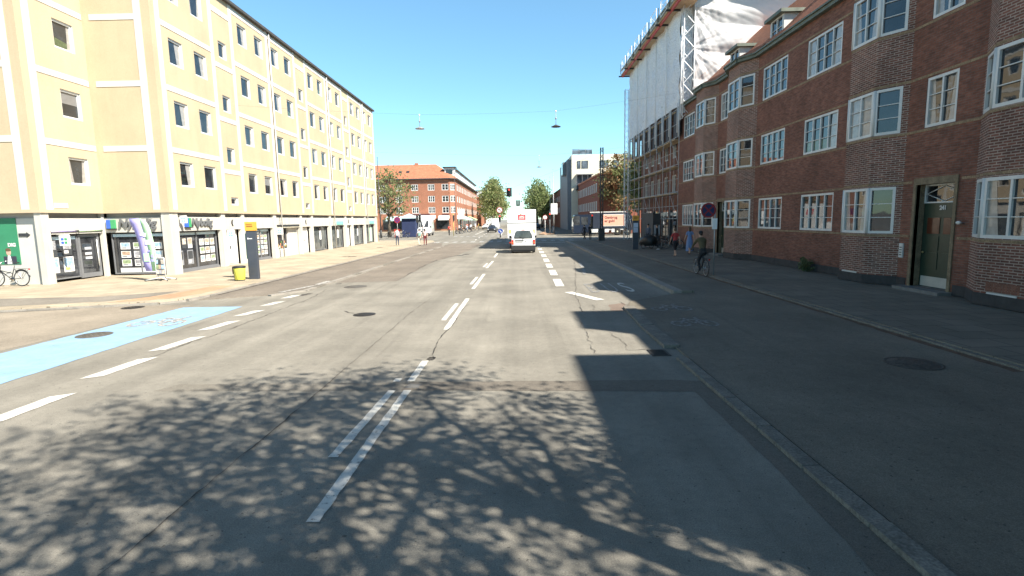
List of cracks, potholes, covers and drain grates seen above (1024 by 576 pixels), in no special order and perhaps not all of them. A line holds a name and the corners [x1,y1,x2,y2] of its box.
crack [574,261,641,354]
manhole cover [883,357,945,370]
